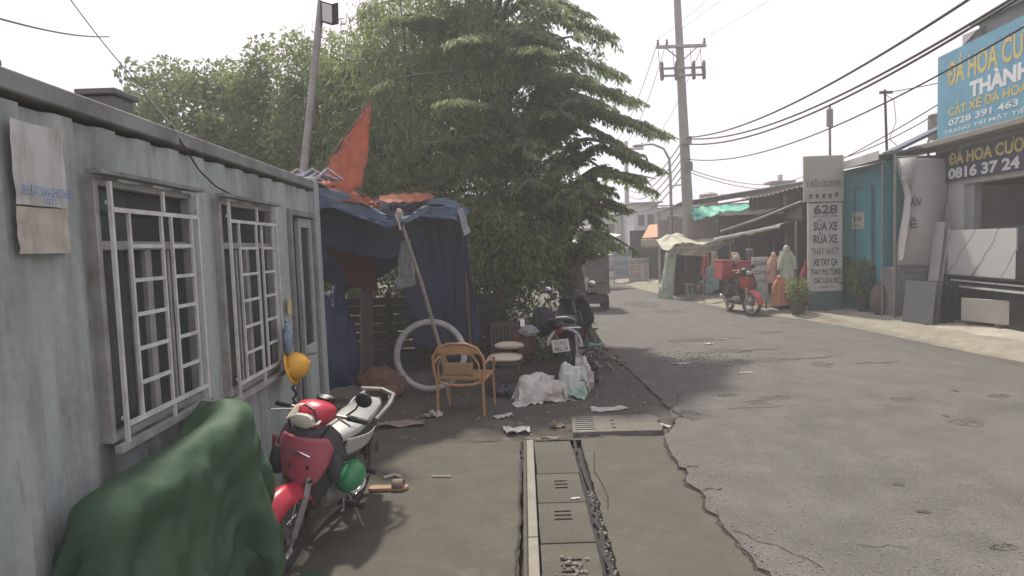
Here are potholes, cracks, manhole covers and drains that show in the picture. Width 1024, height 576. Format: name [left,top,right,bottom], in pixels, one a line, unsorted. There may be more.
drain grate [571,414,663,444]
crack [663,390,822,576]
pothole [947,418,986,427]
crack [593,450,609,508]
